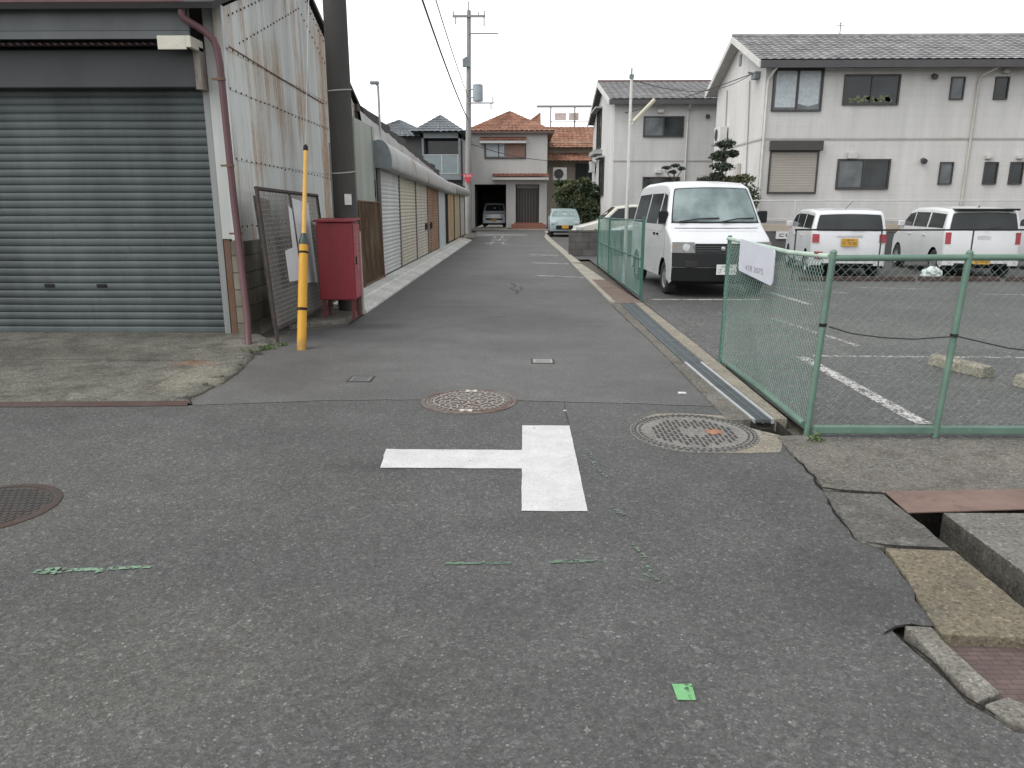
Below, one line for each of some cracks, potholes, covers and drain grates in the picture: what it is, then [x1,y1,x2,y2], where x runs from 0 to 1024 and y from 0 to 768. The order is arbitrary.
drain grate [662,342,703,363]
drain grate [620,303,646,315]
crack [795,458,884,533]
drain grate [632,314,661,328]
manhole cover [421,389,517,414]
drain grate [684,362,734,387]
manhole cover [630,414,759,453]
drain grate [713,387,775,424]
manhole cover [0,484,63,529]
drain grate [646,327,678,343]
